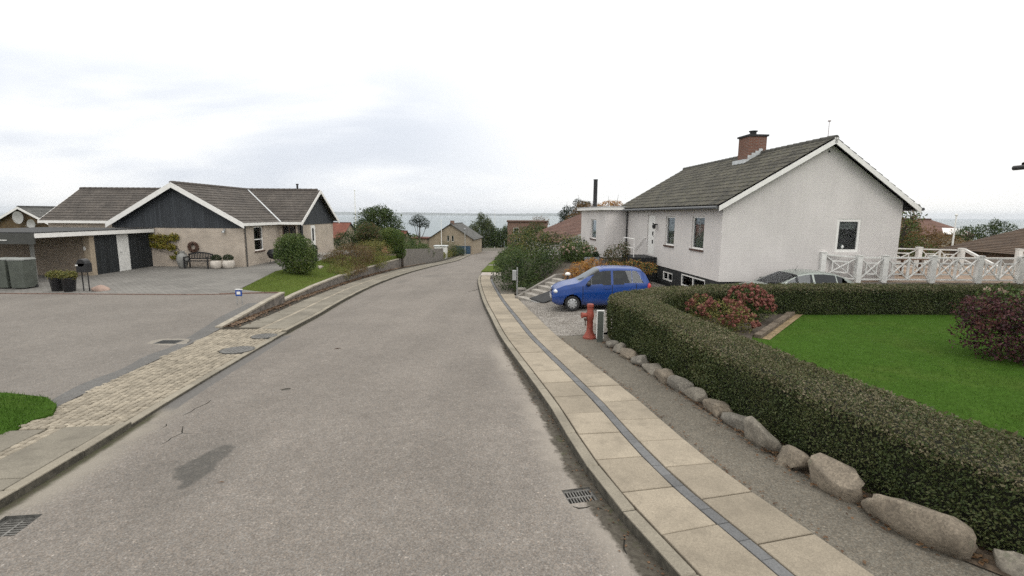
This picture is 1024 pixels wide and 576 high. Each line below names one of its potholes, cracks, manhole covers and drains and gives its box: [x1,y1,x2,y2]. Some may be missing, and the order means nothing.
drain grate [0,514,42,537]
drain grate [562,487,598,508]
manhole cover [219,346,255,355]
crack [161,400,211,442]
